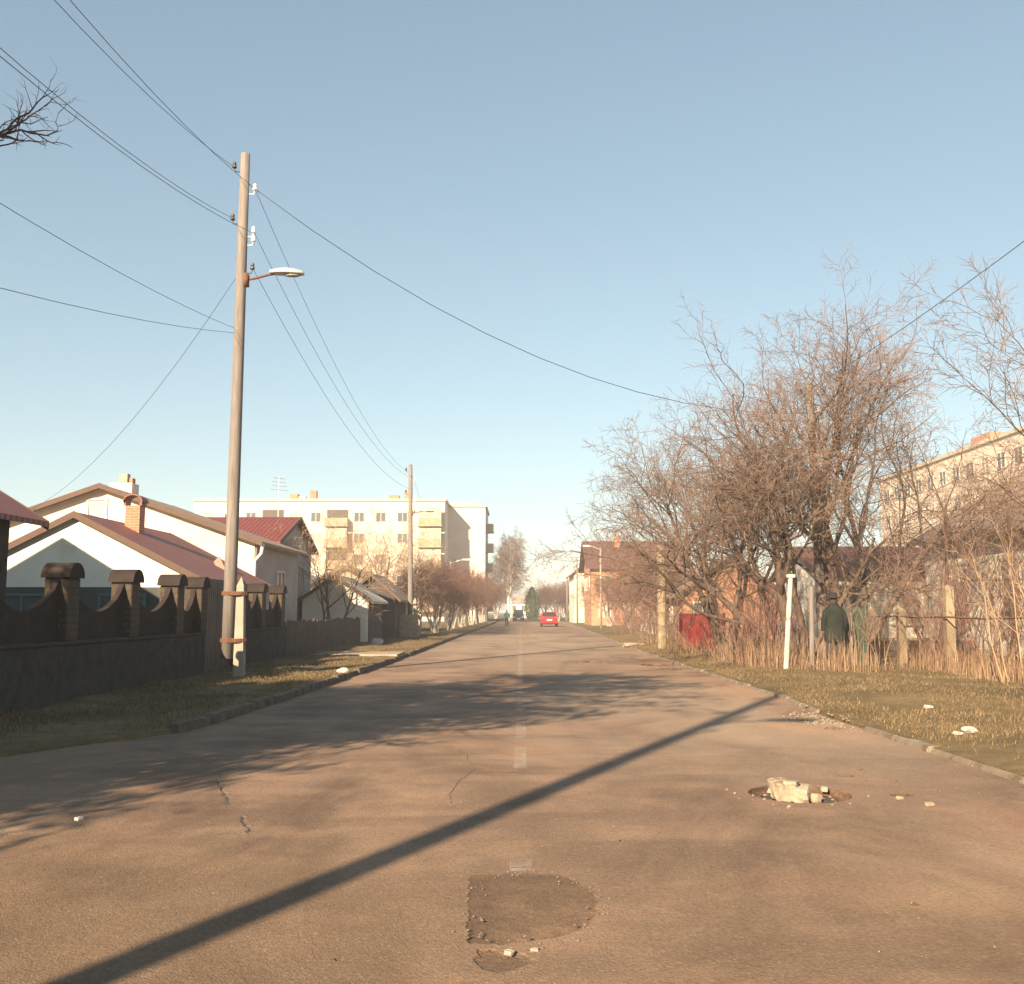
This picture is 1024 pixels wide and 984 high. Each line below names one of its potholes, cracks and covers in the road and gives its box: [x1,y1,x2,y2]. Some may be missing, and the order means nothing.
crack [449,754,492,811]
crack [216,781,253,834]
pothole [465,873,600,945]
pothole [473,949,538,973]
